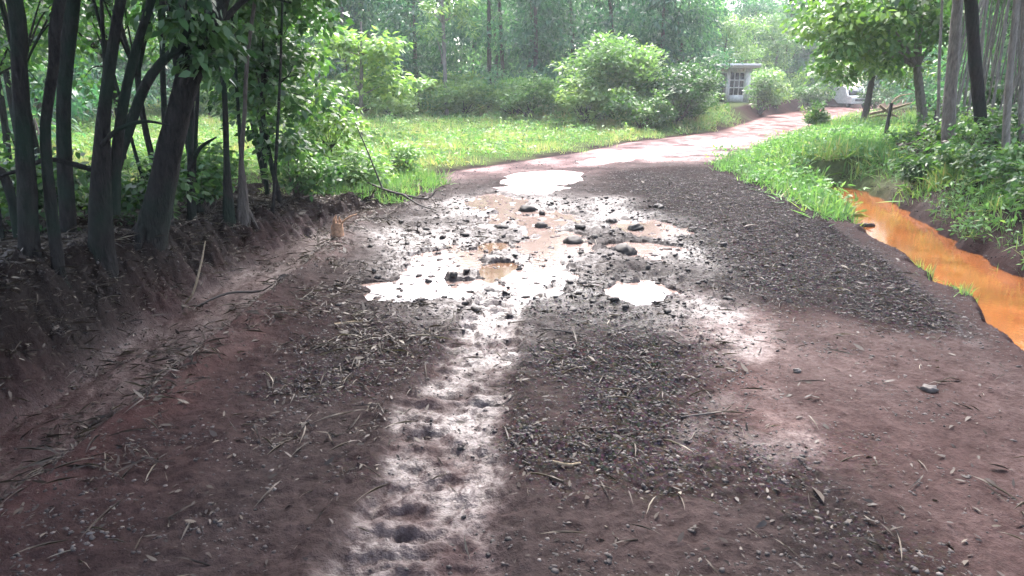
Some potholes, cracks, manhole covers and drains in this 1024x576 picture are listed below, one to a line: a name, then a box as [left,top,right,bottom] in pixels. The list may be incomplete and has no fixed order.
pothole [477,256,521,283]
pothole [499,225,600,305]
pothole [602,277,683,306]
pothole [486,166,588,195]
pothole [601,213,698,262]
pothole [354,239,509,302]
